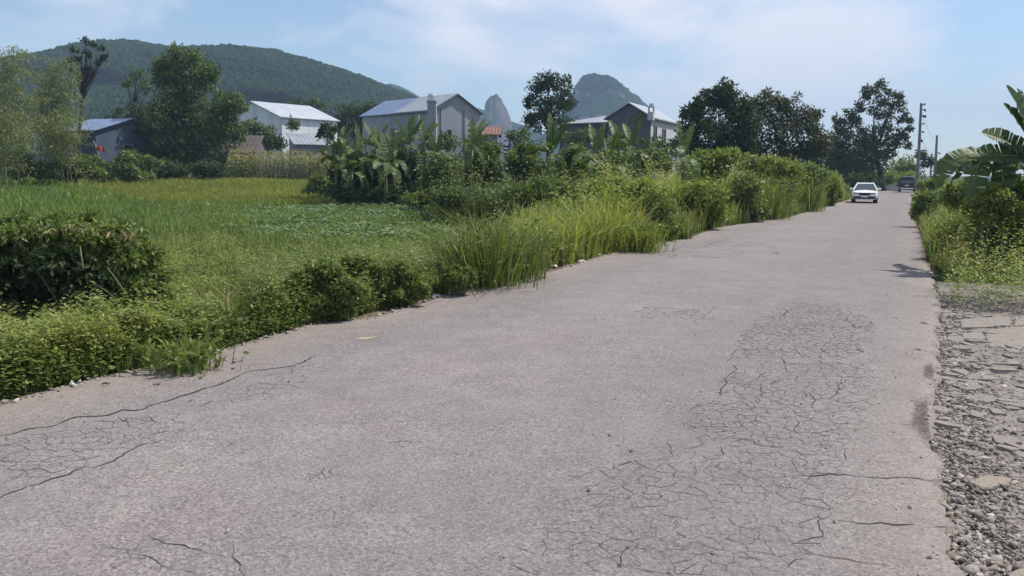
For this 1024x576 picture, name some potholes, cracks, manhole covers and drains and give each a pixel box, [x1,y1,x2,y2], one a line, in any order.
crack [511,302,950,576]
crack [106,534,245,576]
crack [0,356,329,498]
